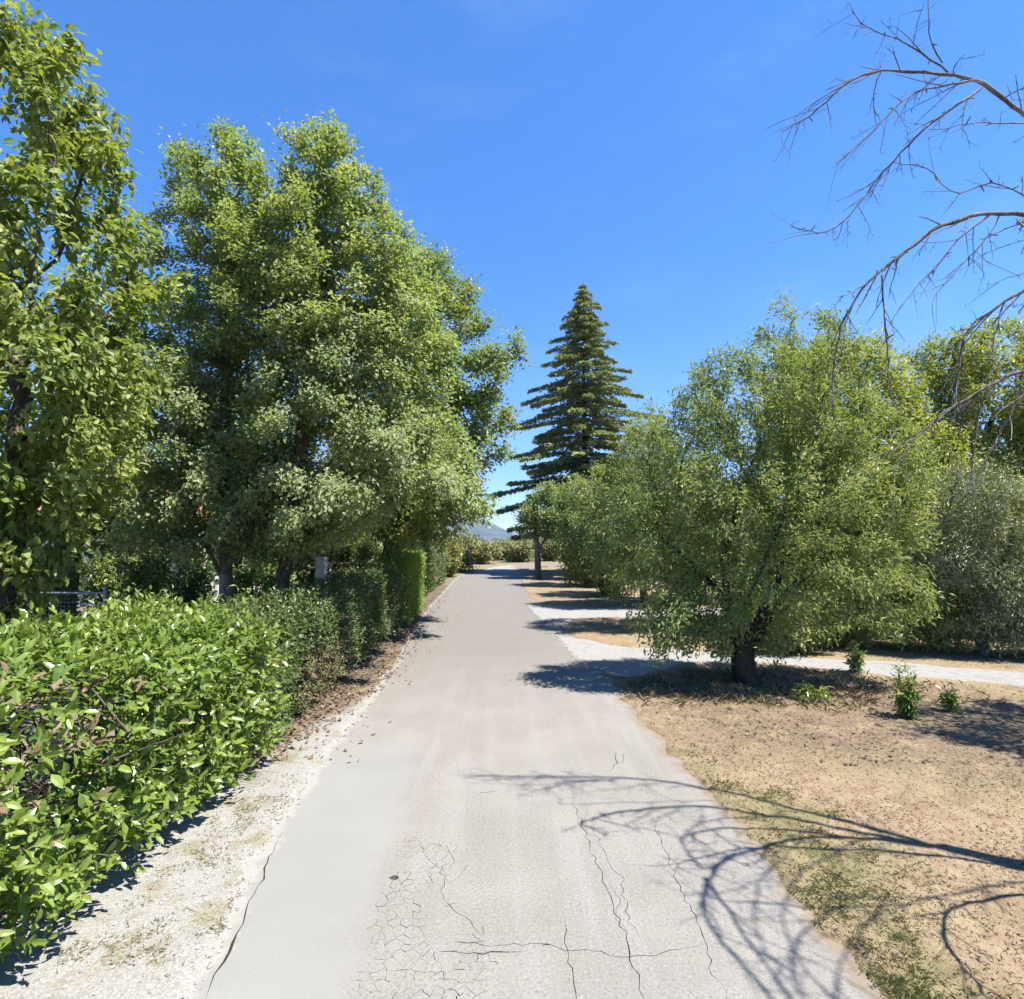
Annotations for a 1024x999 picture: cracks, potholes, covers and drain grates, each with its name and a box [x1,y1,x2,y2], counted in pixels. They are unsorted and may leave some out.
crack [356,803,723,999]
crack [207,842,277,994]
